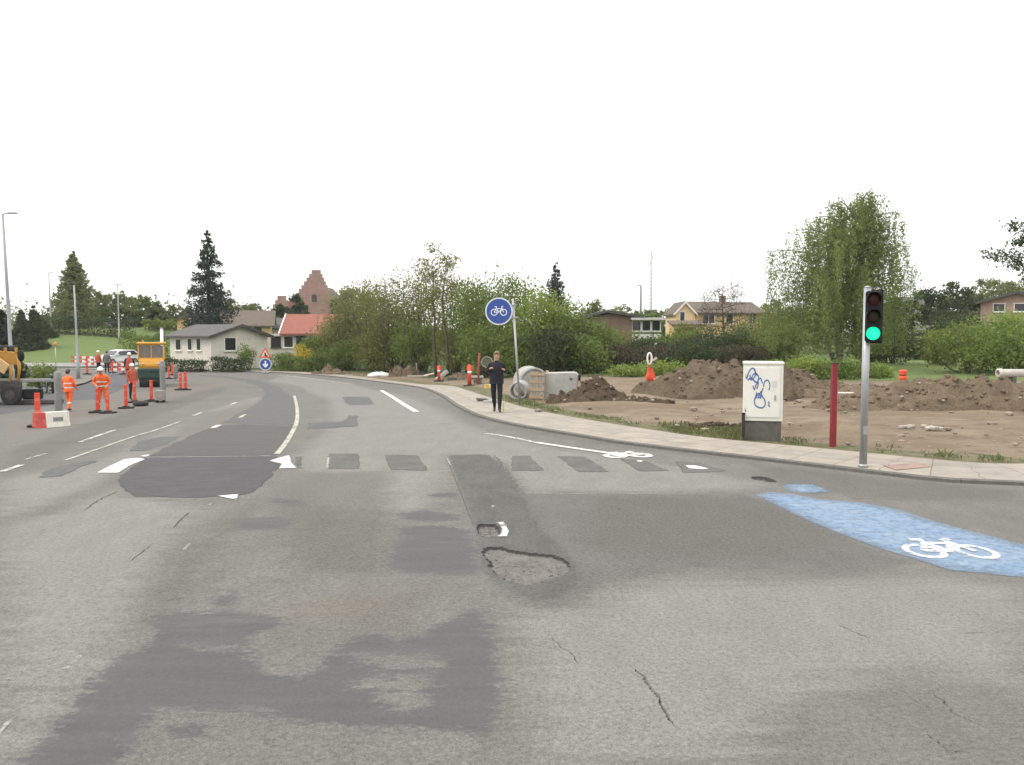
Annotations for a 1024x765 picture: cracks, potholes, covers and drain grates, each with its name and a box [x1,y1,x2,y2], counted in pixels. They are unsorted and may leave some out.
crack [634,668,675,726]
pothole [476,524,500,537]
pothole [481,546,571,585]
crack [925,690,981,753]
